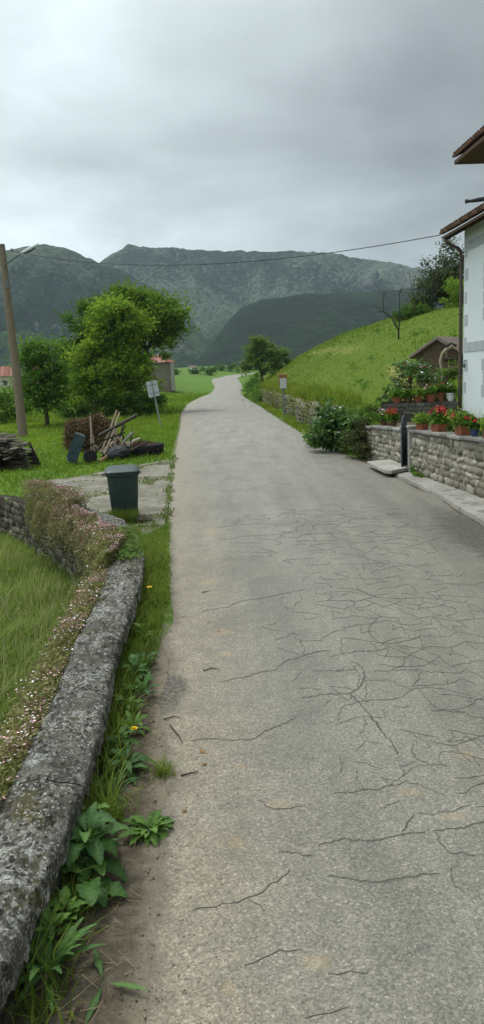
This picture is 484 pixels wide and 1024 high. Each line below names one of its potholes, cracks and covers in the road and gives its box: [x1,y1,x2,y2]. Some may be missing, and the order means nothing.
crack [194,560,484,911]
crack [244,949,302,966]
